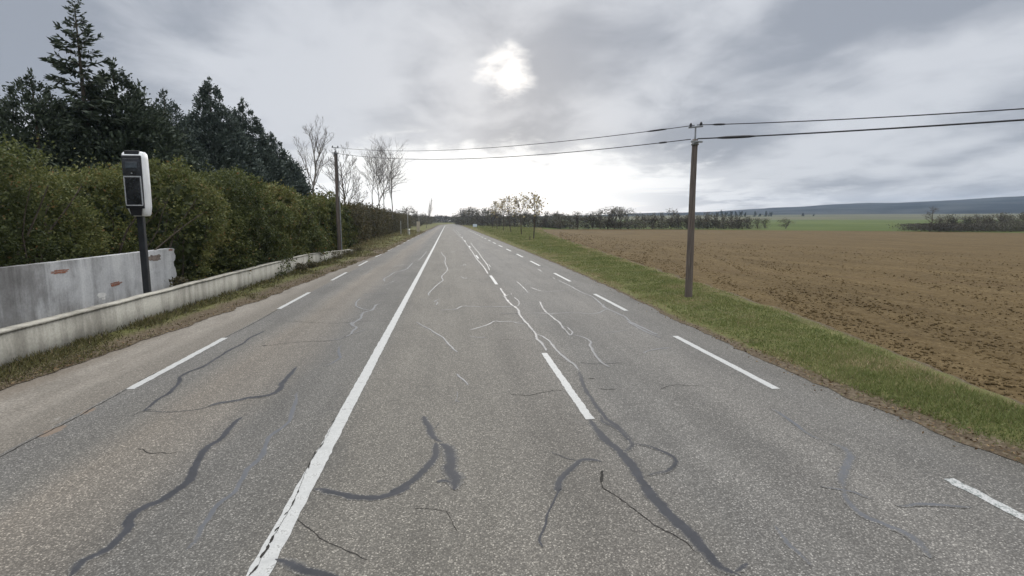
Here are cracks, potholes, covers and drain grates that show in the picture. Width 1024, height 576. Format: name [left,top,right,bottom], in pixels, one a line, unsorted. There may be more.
crack [600,470,694,551]
